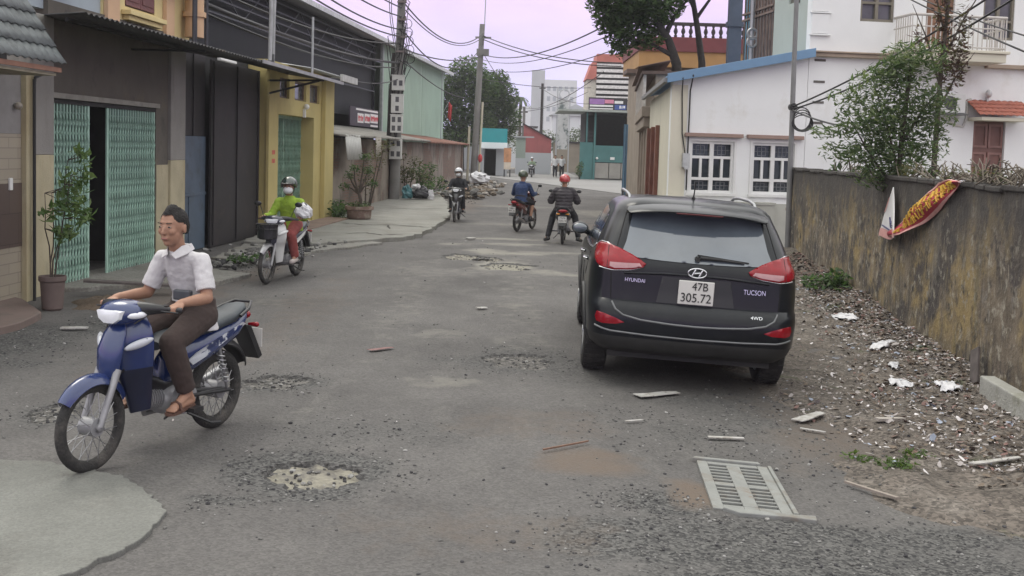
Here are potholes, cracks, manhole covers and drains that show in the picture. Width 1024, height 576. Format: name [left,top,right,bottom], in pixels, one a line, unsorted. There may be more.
pothole [480,263,539,271]
pothole [441,253,490,261]
drain grate [692,456,817,524]
pothole [24,404,84,424]
pothole [258,459,368,490]
pothole [478,353,554,370]
pothole [241,374,317,390]
